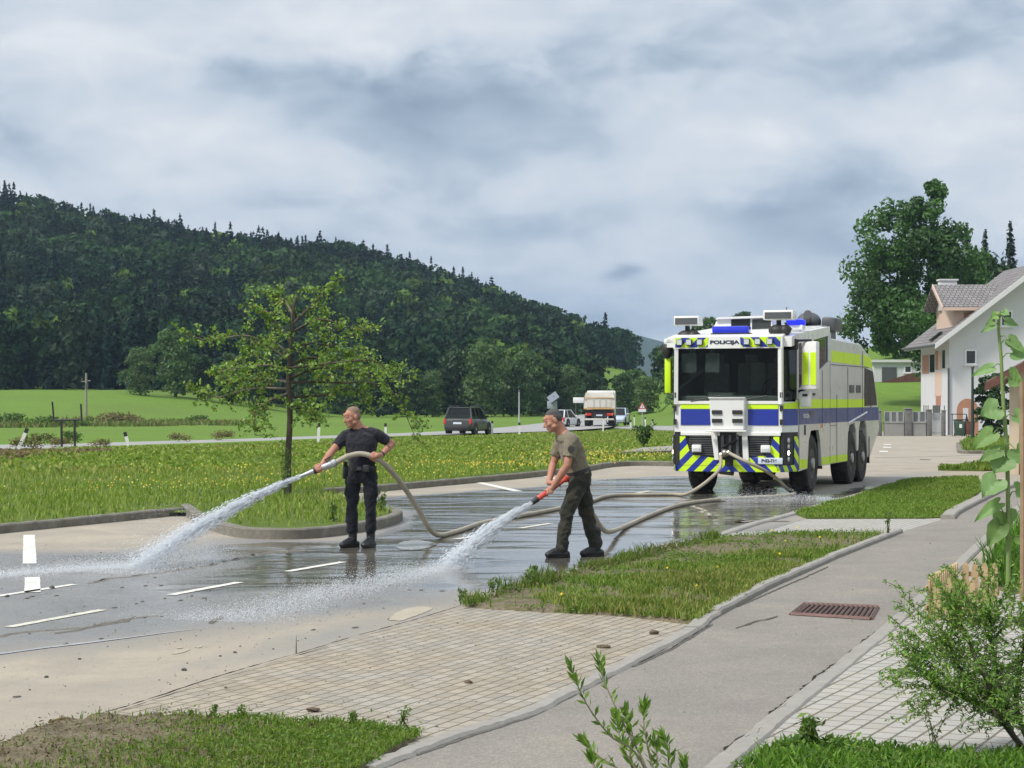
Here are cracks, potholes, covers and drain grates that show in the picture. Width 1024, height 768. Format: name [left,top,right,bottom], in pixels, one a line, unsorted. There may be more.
crack [723,631,876,751]
